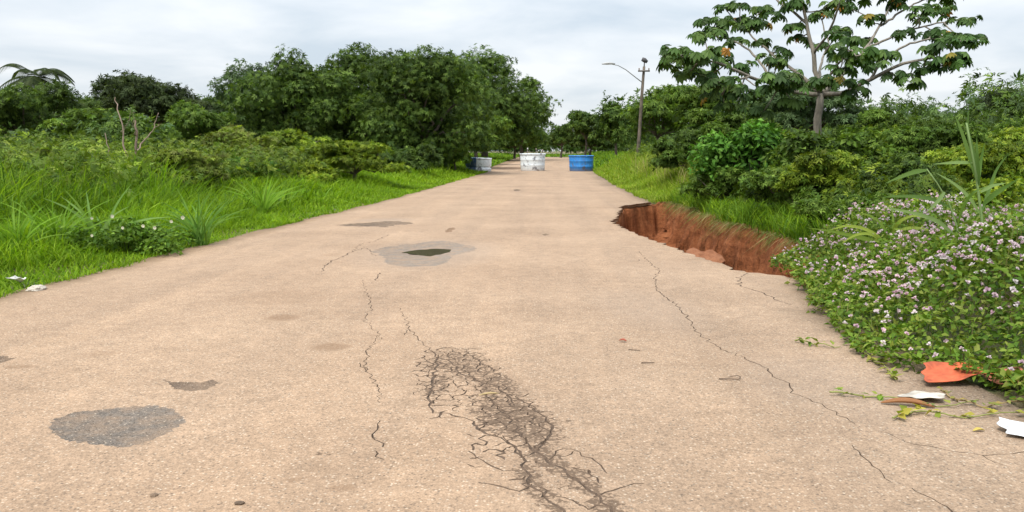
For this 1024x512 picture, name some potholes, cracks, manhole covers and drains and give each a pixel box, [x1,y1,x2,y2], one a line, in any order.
crack [400,309,644,512]
pothole [371,241,477,267]
crack [359,273,385,460]
crack [632,254,1021,512]
